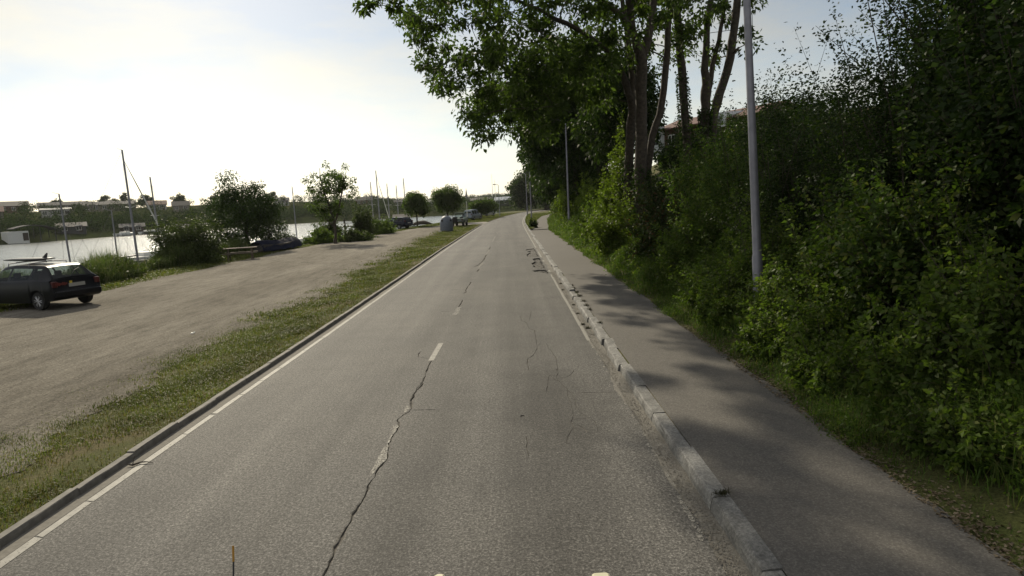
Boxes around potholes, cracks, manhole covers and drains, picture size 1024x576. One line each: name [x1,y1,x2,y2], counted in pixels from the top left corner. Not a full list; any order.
crack [322,352,433,576]
crack [521,314,615,445]
crack [442,247,491,312]
